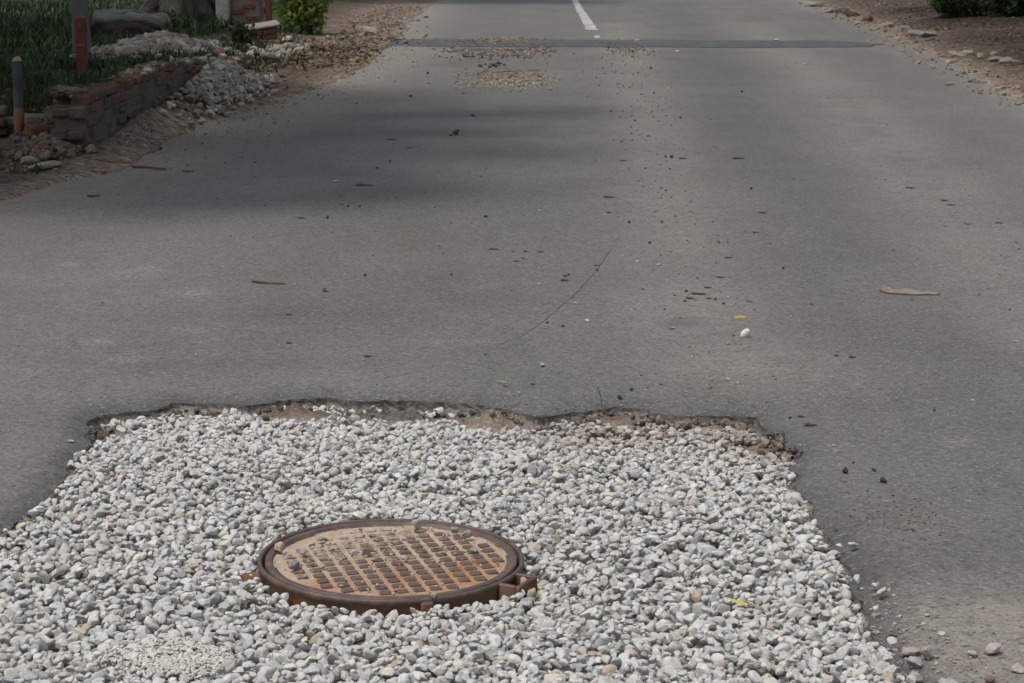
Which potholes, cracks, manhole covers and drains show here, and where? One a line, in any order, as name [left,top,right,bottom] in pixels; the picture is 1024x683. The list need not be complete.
crack [503,248,612,344]
manhole cover [241,518,537,620]
pothole [0,398,908,683]
